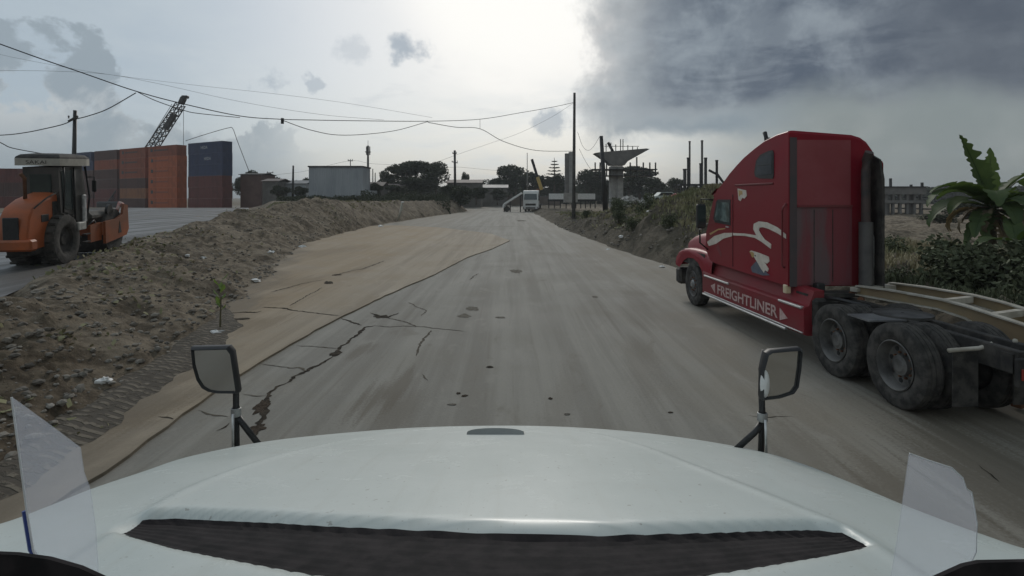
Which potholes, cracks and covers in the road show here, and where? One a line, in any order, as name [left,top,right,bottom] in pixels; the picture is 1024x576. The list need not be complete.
crack [236,280,460,435]
